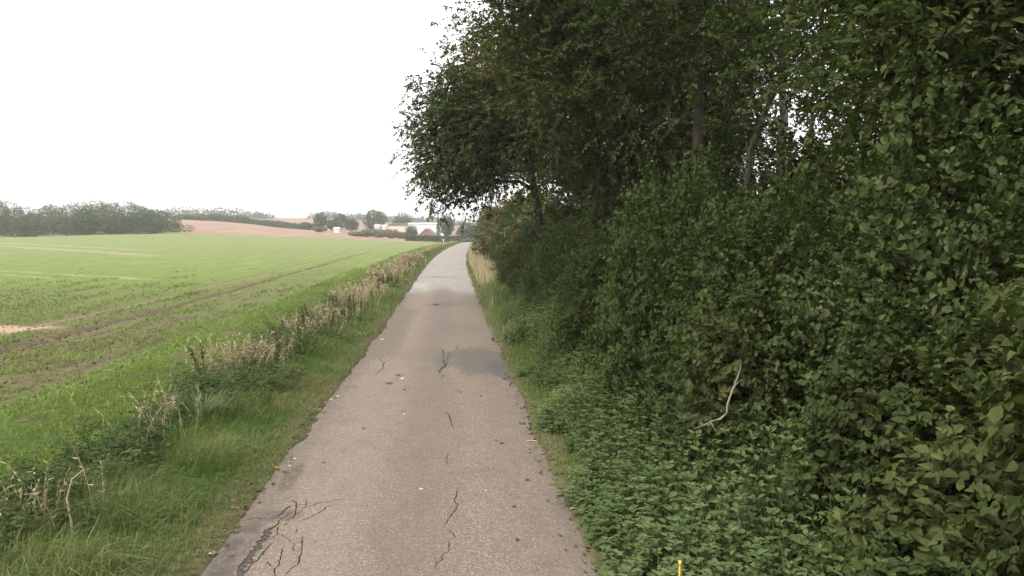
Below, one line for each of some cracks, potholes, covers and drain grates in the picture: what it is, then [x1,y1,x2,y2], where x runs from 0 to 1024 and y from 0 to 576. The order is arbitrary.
crack [237,498,339,576]
crack [435,487,458,566]
